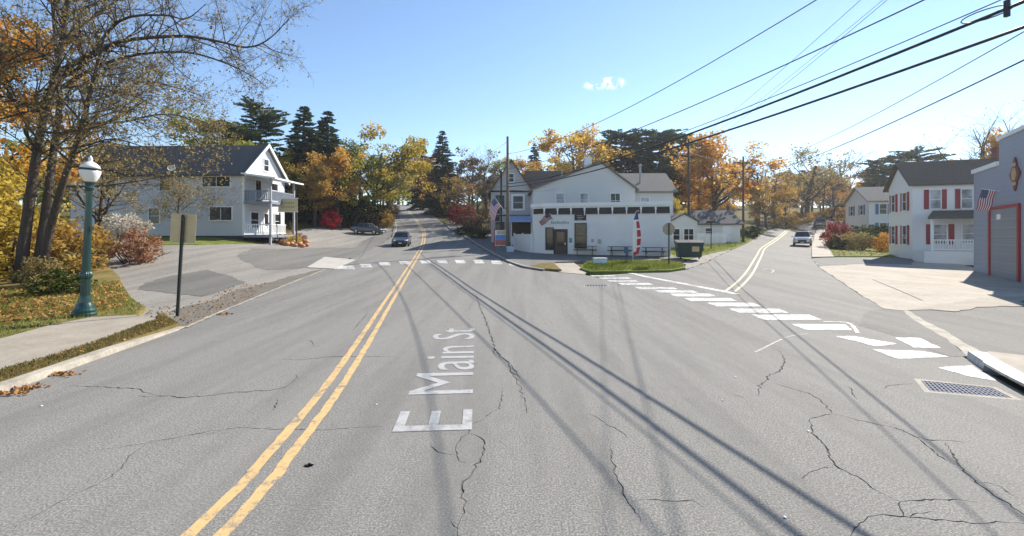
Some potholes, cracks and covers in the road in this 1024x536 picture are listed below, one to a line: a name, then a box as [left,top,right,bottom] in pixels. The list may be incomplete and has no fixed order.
crack [736,350,786,398]
crack [775,383,1024,536]
crack [432,300,527,536]
crack [592,415,701,521]
crack [86,340,387,411]
drain grate [914,378,1021,400]
crack [5,426,375,535]
